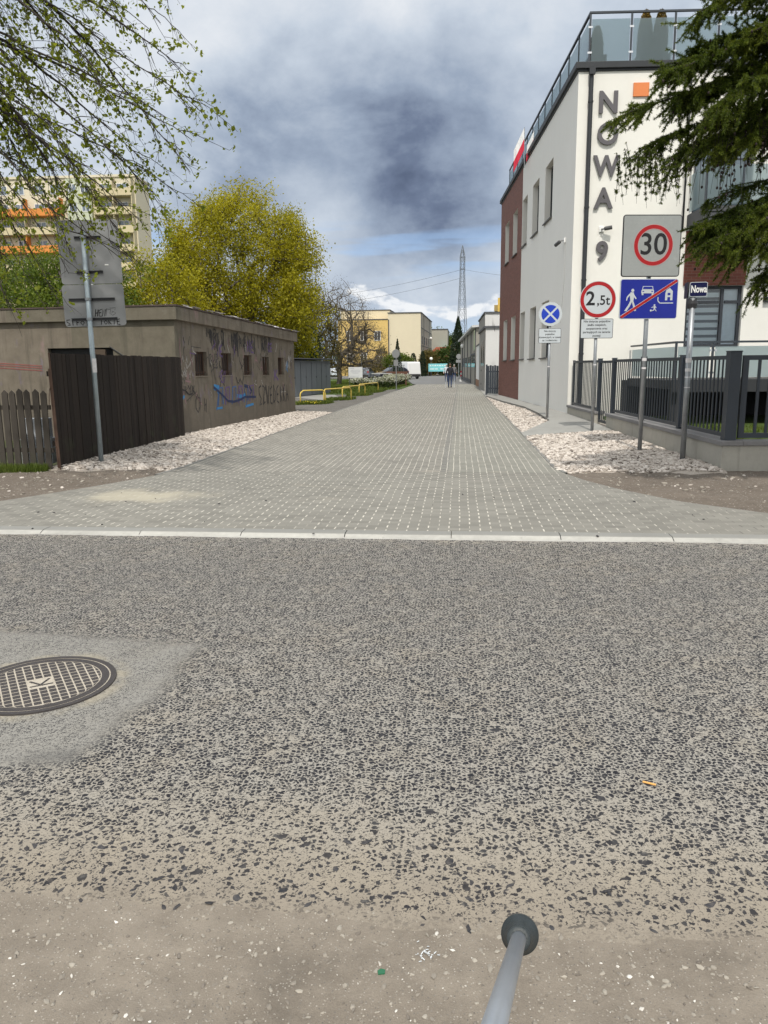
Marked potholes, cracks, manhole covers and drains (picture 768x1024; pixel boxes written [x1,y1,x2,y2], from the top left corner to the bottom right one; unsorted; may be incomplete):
manhole cover [0,656,117,716]
